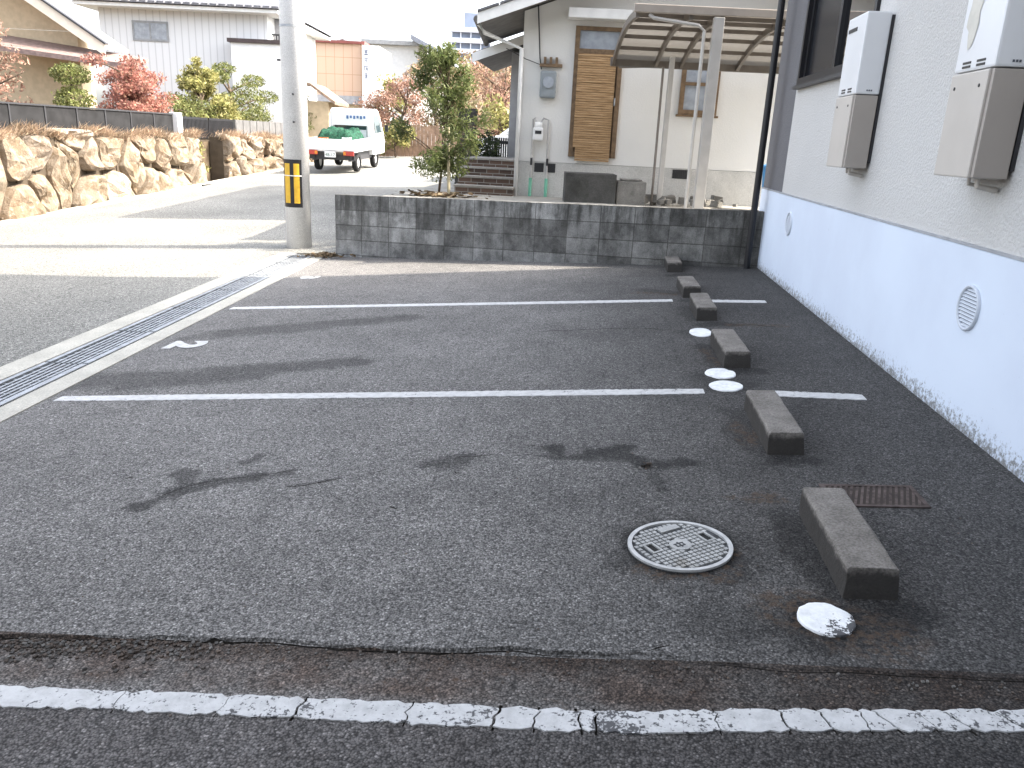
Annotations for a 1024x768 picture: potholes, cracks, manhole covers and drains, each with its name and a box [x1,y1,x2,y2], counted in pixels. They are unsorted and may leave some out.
drain grate [819,484,931,509]
crack [649,644,1024,682]
crack [574,709,597,735]
manhole cover [628,521,733,574]
crack [0,636,604,658]
